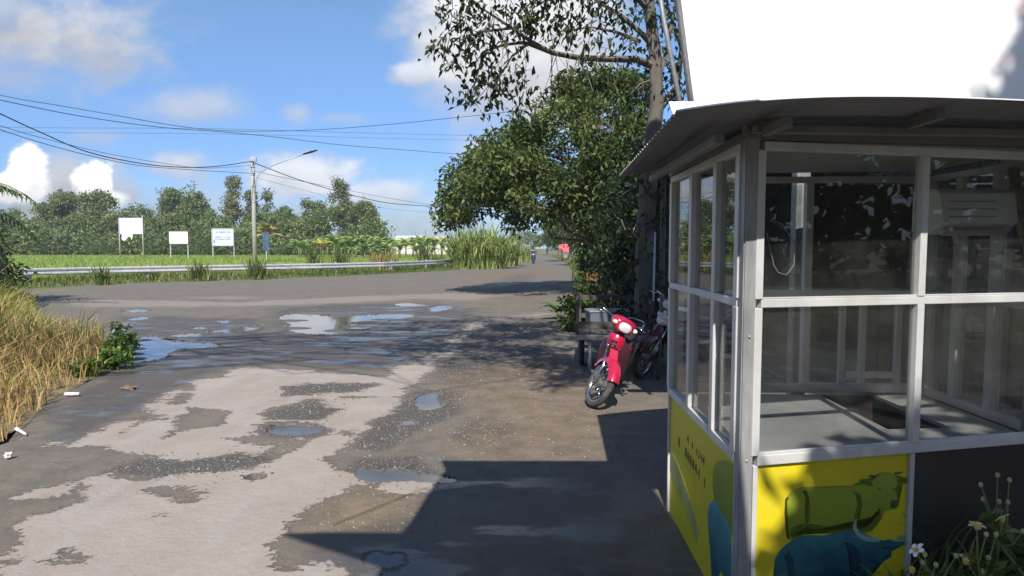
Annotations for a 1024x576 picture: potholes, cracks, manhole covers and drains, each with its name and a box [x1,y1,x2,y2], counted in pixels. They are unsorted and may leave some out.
pothole [350,467,460,484]
pothole [240,471,274,482]
pothole [262,421,326,436]
pothole [360,550,411,575]
pothole [409,391,453,411]
pothole [121,334,225,363]
